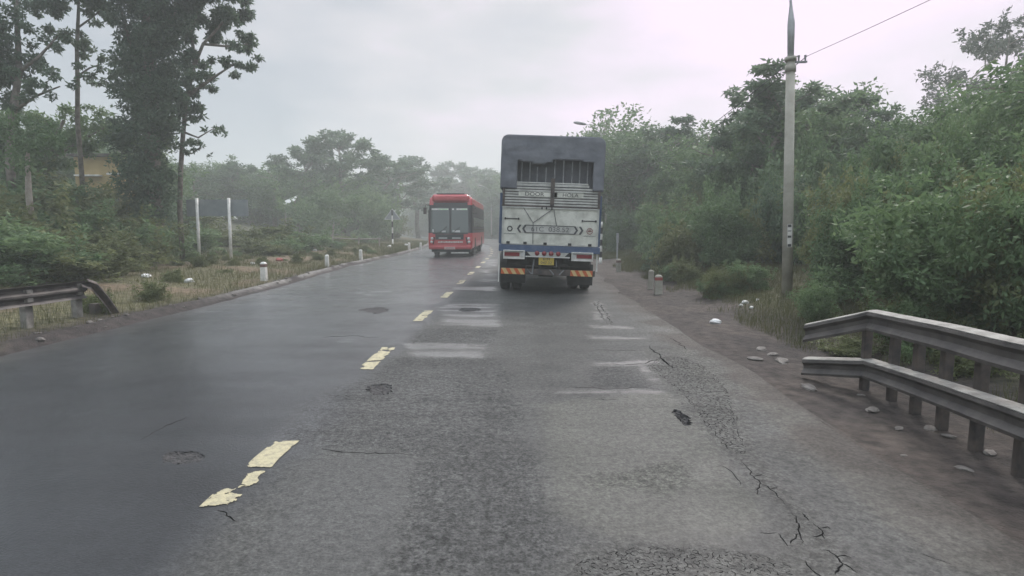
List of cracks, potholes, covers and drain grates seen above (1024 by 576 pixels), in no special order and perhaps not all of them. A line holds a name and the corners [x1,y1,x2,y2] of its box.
crack [648,338,859,576]
crack [575,547,793,576]
pothole [671,409,692,426]
pothole [161,451,205,464]
pothole [365,384,393,396]
